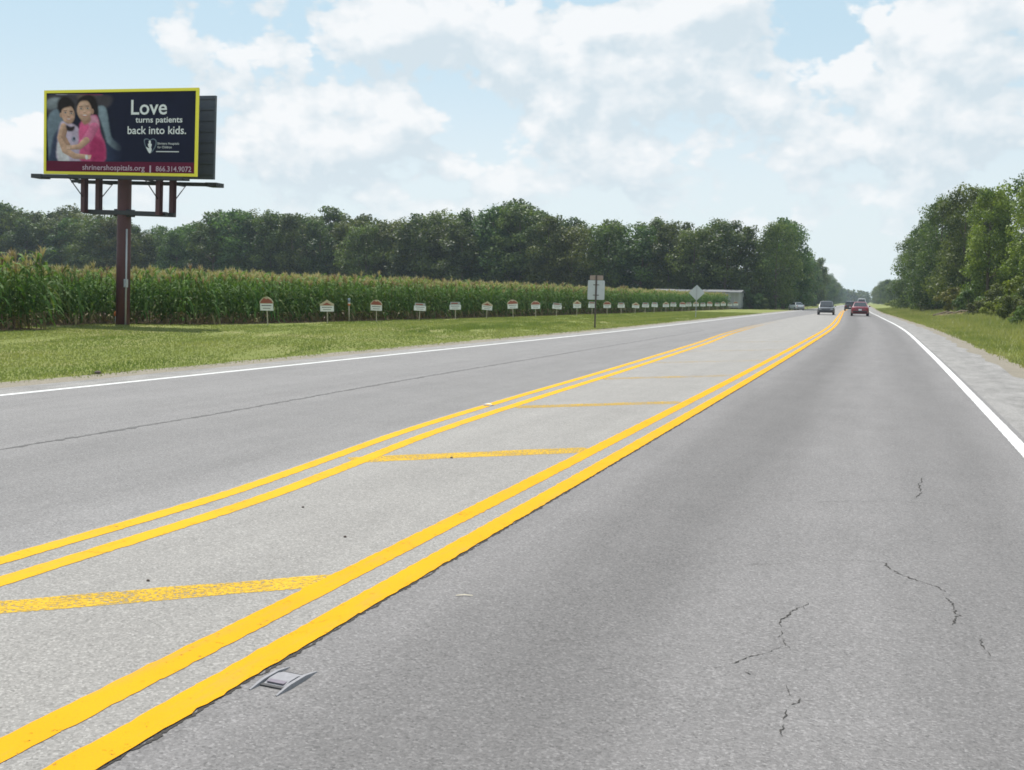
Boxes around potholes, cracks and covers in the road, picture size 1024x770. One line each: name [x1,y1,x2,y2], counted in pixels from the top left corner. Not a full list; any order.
crack [751,560,961,625]
